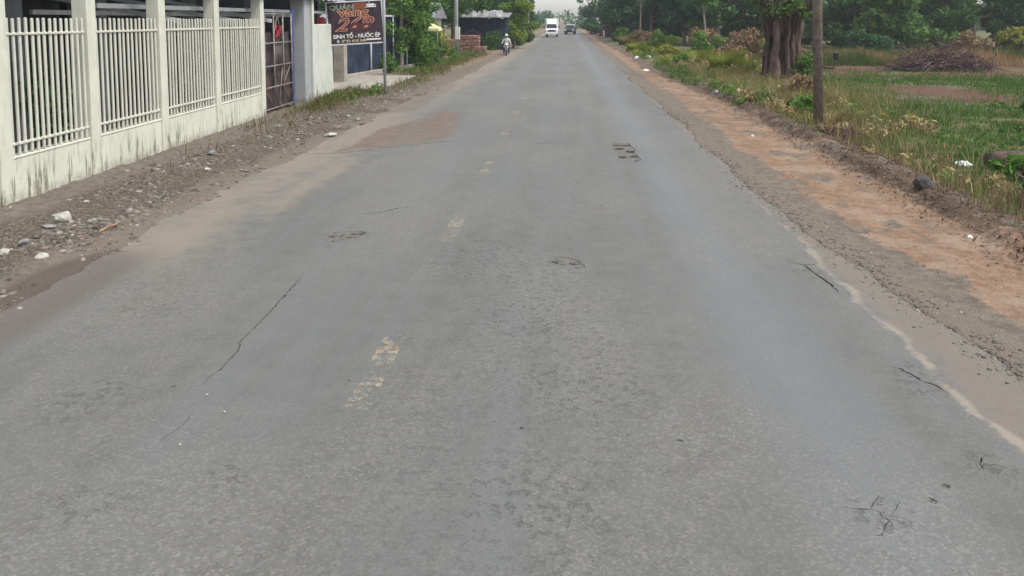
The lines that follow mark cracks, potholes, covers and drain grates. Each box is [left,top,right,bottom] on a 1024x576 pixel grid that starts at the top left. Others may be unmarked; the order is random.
pothole [326,231,366,242]
crack [792,262,841,294]
pothole [609,143,641,162]
pothole [548,257,585,270]
crack [888,365,946,392]
crack [839,497,900,536]
